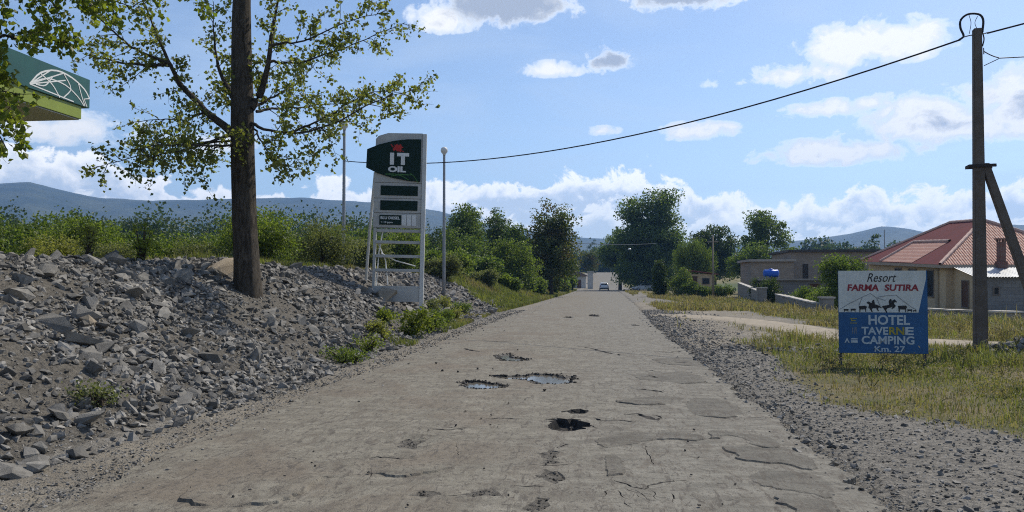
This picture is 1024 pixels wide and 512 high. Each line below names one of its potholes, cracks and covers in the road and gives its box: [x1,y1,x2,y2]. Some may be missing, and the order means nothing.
pothole [537,450,563,465]
pothole [535,469,566,484]
pothole [397,439,426,449]
pothole [547,418,592,432]
pothole [489,372,579,384]
pothole [522,497,550,512]
pothole [457,379,510,389]
crack [604,446,688,508]
pothole [493,352,532,361]
pothole [462,488,502,497]
crack [592,413,666,428]
